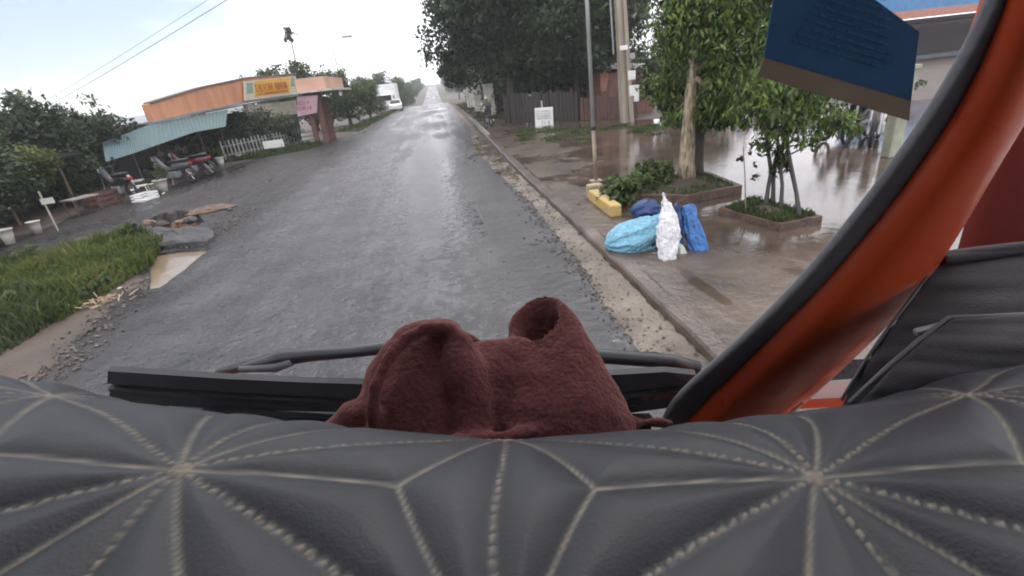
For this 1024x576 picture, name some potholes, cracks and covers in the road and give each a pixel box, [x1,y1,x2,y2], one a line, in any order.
pothole [149,211,205,228]
pothole [147,248,211,290]
